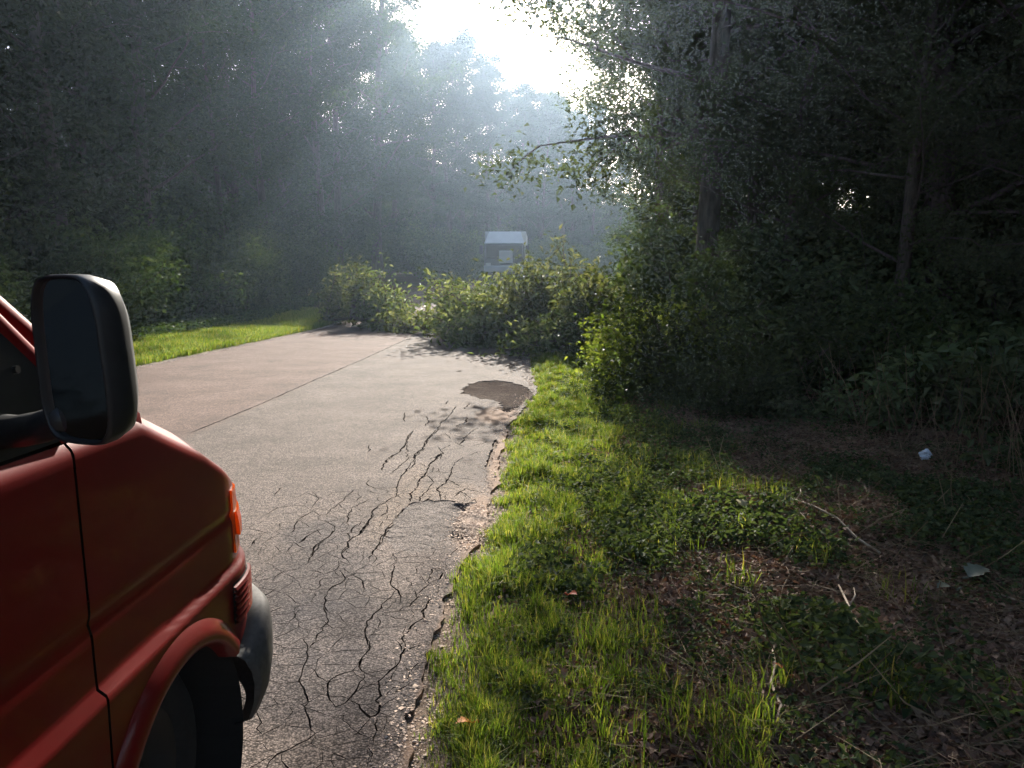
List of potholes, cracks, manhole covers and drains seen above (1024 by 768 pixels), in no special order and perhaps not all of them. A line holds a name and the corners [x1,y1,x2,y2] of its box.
crack [241,404,497,768]
